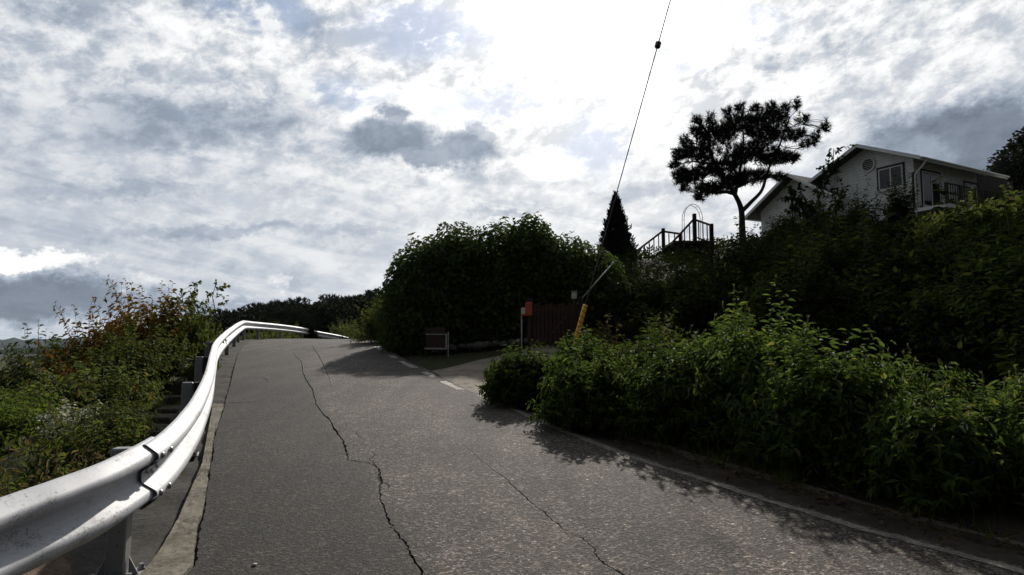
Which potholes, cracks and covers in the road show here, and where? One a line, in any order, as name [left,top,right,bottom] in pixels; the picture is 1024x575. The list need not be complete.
crack [294,345,424,575]
crack [459,441,624,575]
